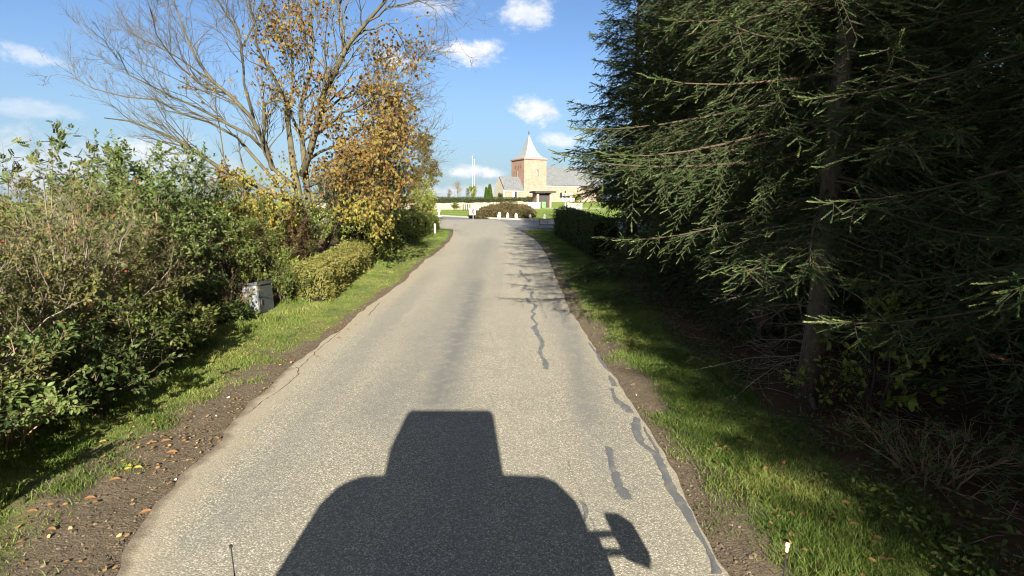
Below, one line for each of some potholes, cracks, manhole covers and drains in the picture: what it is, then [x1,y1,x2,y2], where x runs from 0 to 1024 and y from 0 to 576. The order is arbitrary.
crack [249,332,340,412]
